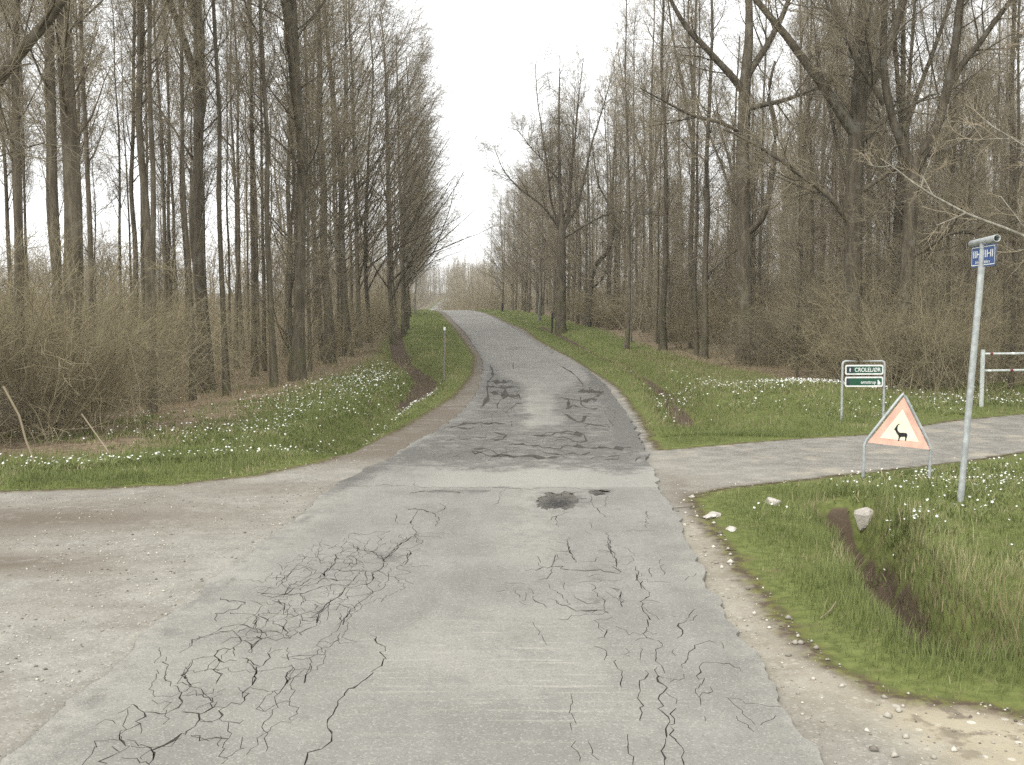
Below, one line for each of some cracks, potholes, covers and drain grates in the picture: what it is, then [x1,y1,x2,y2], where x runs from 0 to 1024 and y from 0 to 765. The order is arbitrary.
crack [82,512,441,765]
crack [400,363,641,462]
pothole [536,491,587,510]
crack [343,484,781,765]
